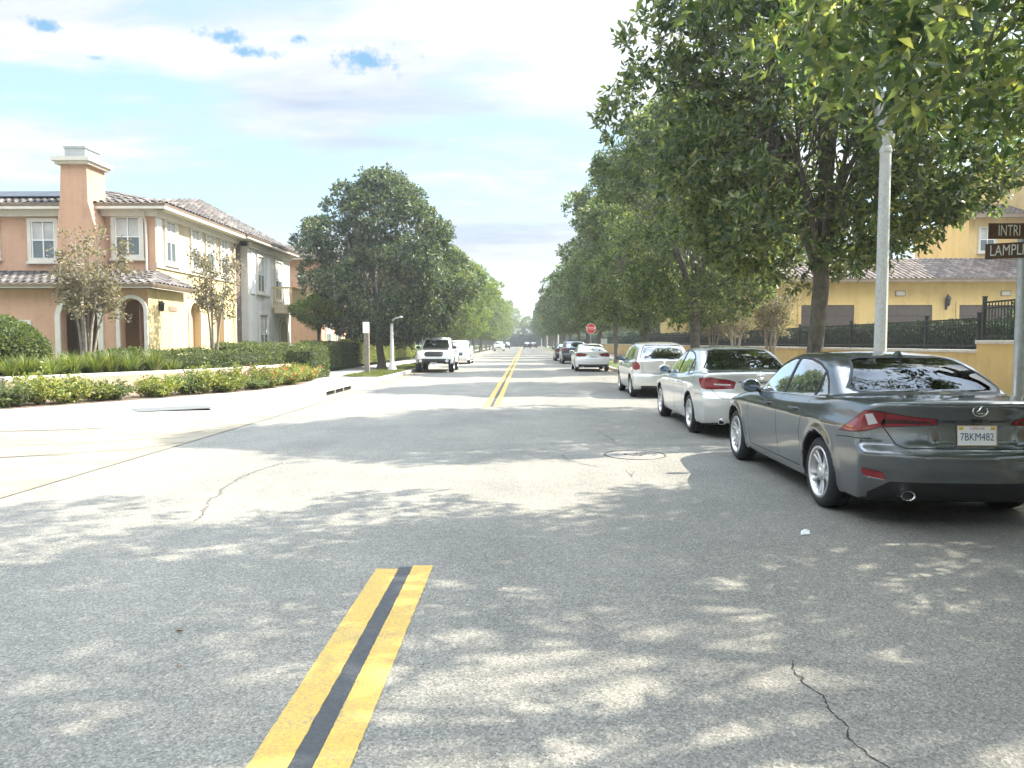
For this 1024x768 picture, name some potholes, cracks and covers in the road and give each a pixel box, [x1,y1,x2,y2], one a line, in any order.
crack [789,655,890,768]
crack [194,462,283,521]
drain grate [306,384,352,396]
manhole cover [604,450,666,460]
